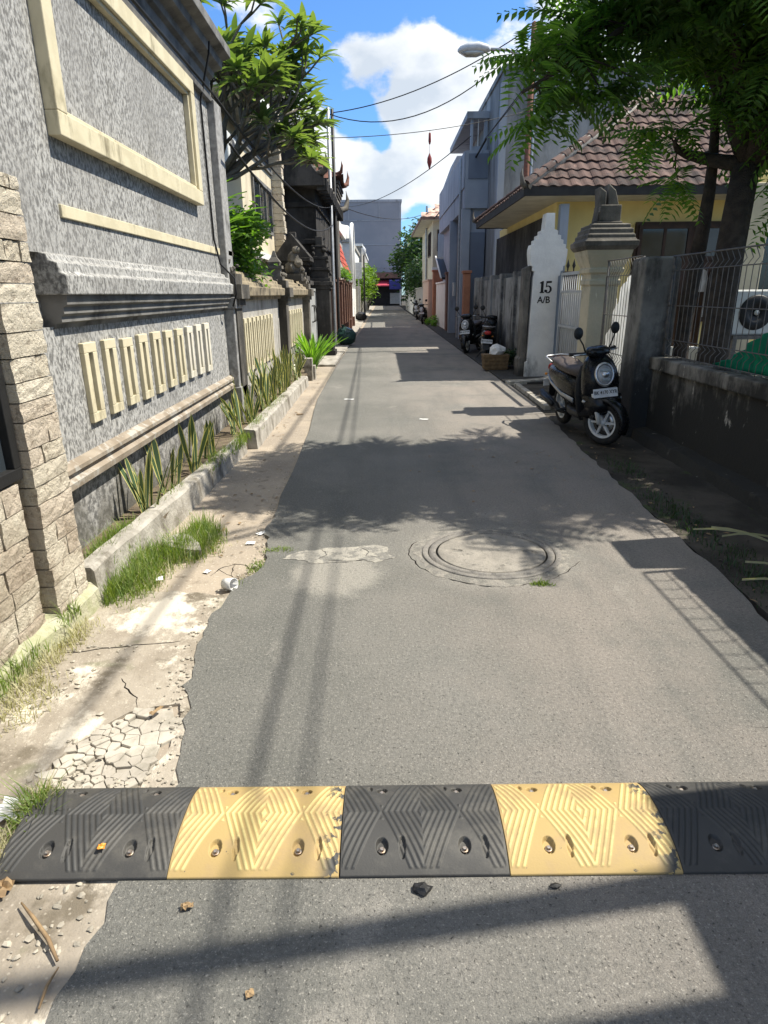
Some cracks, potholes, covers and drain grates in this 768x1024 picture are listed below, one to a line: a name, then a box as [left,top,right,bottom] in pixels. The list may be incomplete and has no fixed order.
crack [33,679,186,789]
manhole cover [411,528,575,587]
